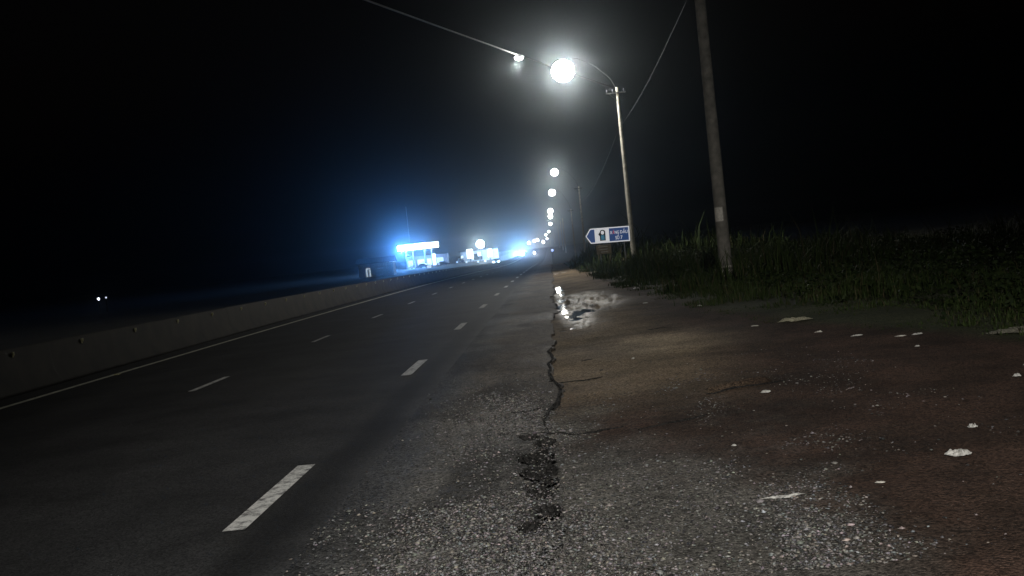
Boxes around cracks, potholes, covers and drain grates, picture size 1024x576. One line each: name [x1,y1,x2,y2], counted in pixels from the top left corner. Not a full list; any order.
pothole [515,433,561,536]
crack [511,346,707,435]
